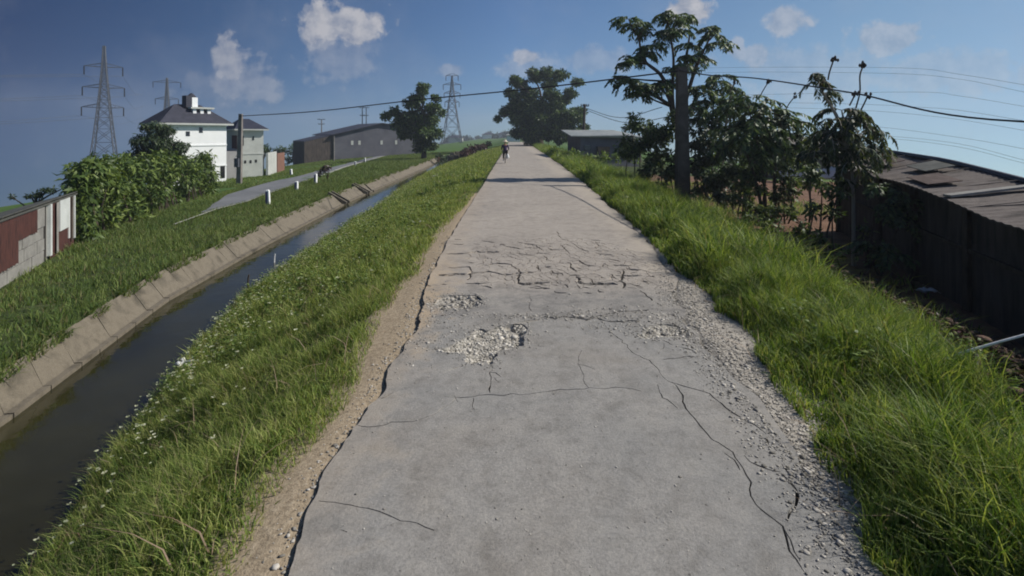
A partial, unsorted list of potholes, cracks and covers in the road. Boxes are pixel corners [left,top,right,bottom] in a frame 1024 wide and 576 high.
pothole [638,324,689,339]
crack [428,232,804,572]
pothole [432,295,482,309]
crack [321,501,433,530]
pothole [439,324,528,365]
crack [358,350,639,427]
